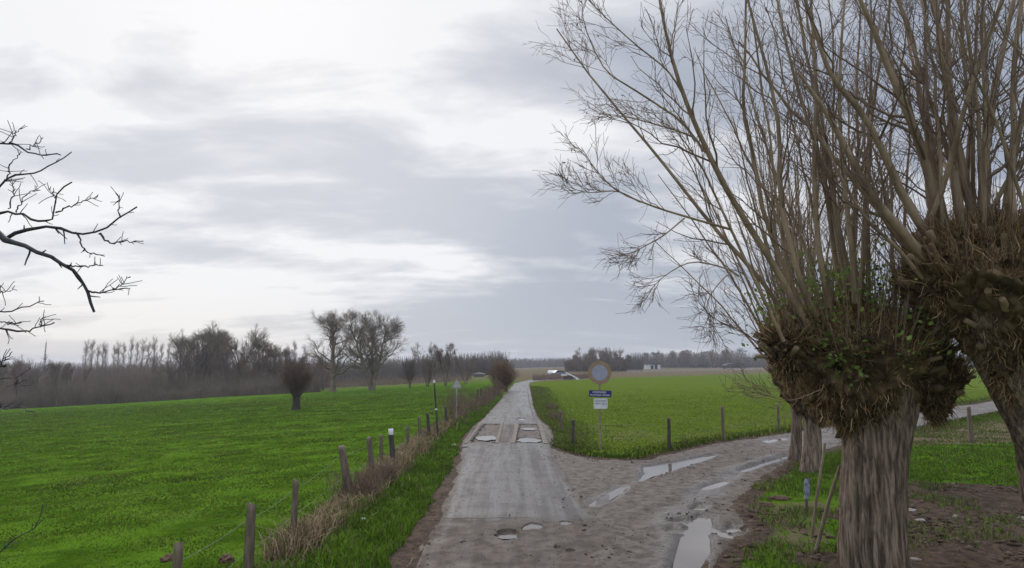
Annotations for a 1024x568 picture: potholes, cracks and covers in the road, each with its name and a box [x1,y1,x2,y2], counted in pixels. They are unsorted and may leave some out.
pothole [470,424,500,443]
pothole [516,424,542,443]
pothole [493,528,520,541]
